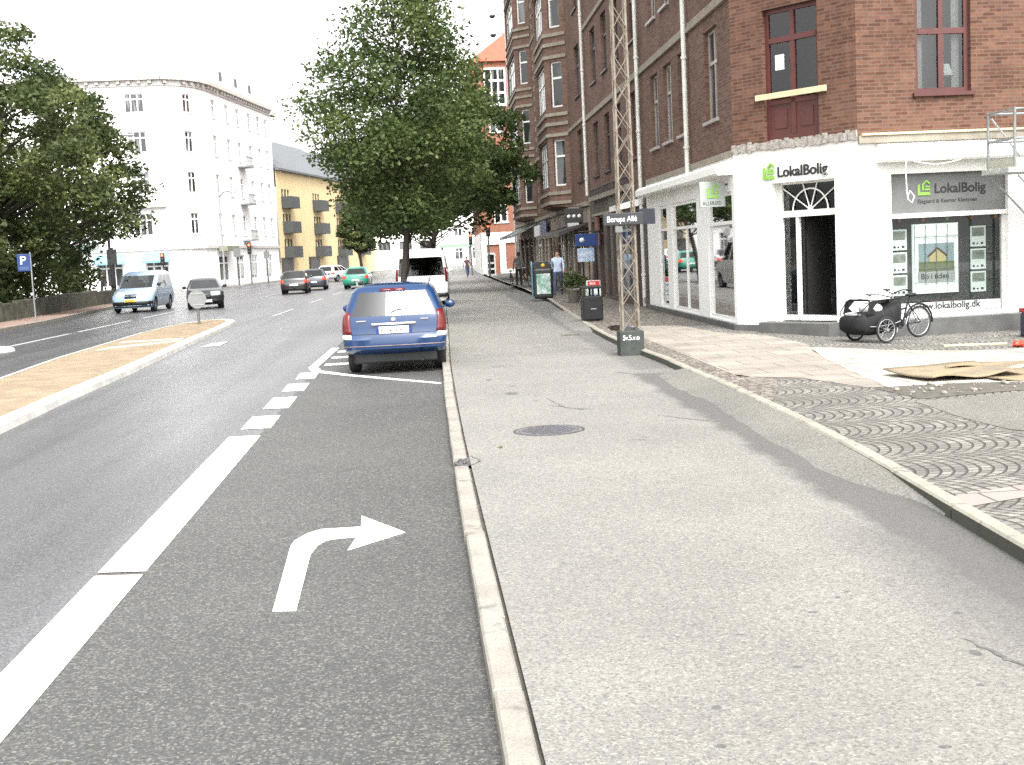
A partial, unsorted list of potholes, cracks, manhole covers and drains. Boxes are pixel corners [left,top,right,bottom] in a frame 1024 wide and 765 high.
crack [963,638,1024,666]
manhole cover [513,425,585,436]
crack [547,398,711,440]
